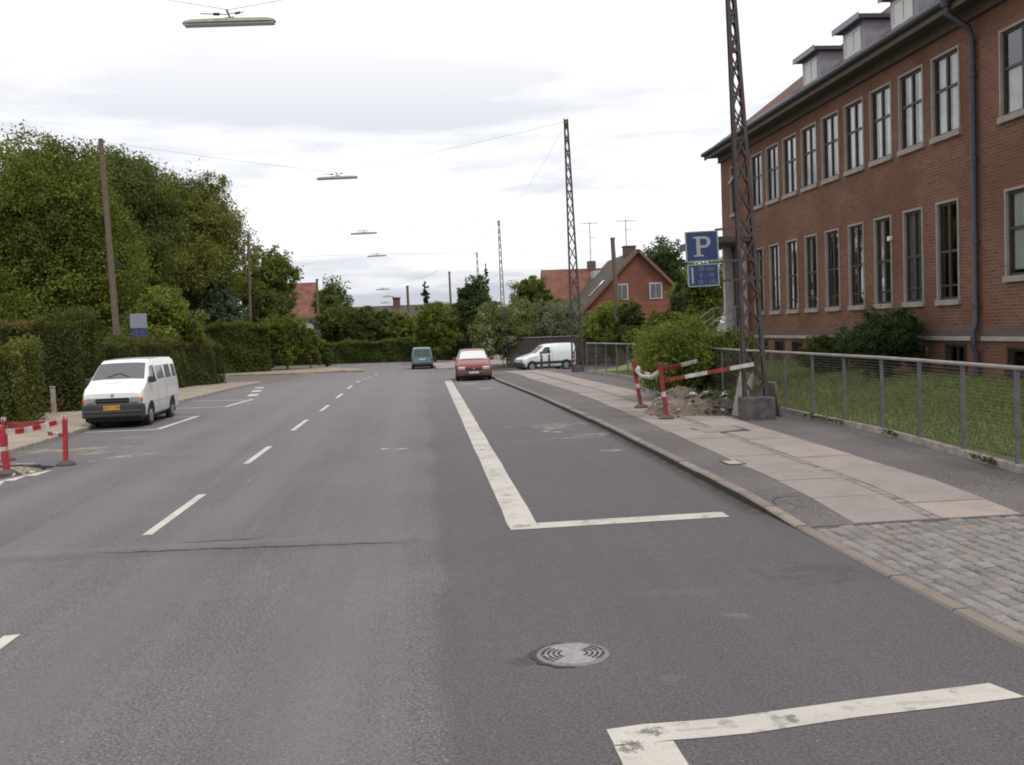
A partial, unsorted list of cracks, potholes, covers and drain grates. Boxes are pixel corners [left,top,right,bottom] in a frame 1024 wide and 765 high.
manhole cover [529,642,610,668]
